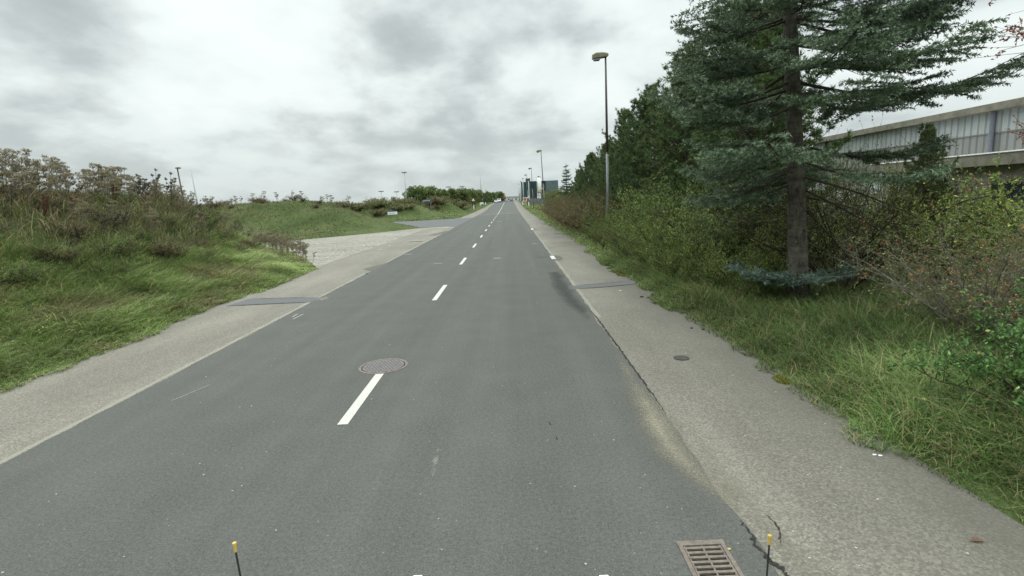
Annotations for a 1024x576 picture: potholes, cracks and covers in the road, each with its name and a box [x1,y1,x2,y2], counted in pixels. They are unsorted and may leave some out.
manhole cover [358,358,408,374]
drain grate [676,539,744,576]
crack [741,512,789,576]
